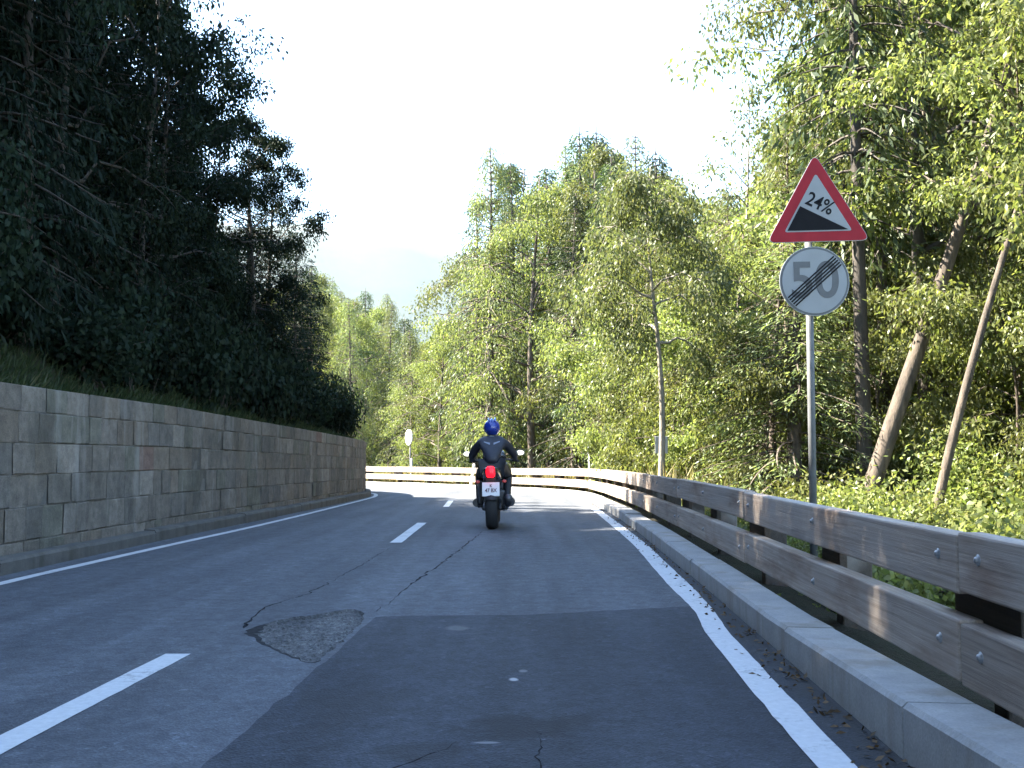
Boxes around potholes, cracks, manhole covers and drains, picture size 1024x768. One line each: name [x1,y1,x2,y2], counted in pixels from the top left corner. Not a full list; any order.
crack [243,550,386,628]
crack [376,531,482,612]
crack [534,731,543,768]
pothole [244,609,364,663]
